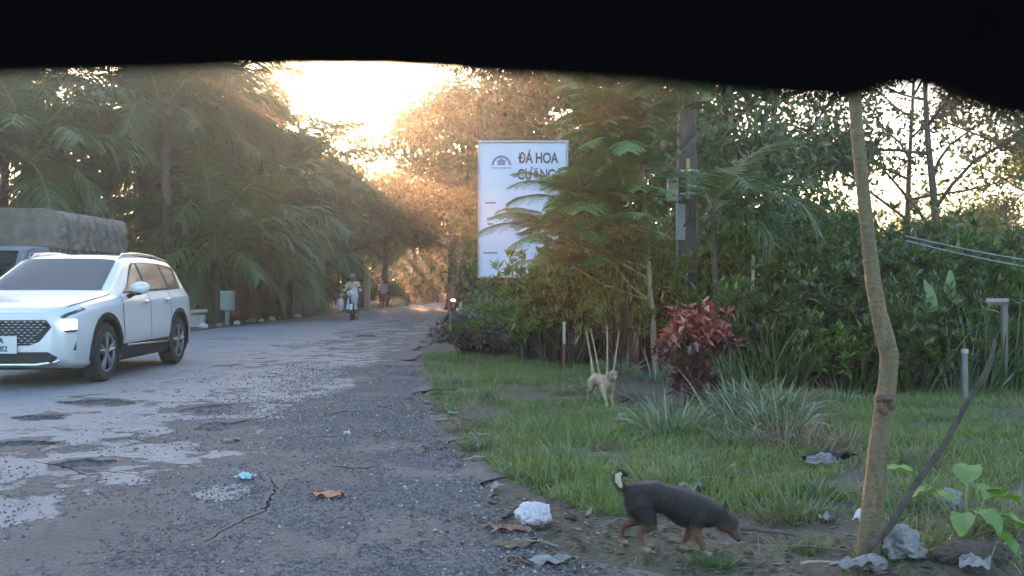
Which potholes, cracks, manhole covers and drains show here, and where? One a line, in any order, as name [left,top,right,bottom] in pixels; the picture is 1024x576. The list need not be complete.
pothole [193,420,261,432]
pothole [176,404,234,415]
crack [204,477,279,542]
pothole [52,458,117,469]
